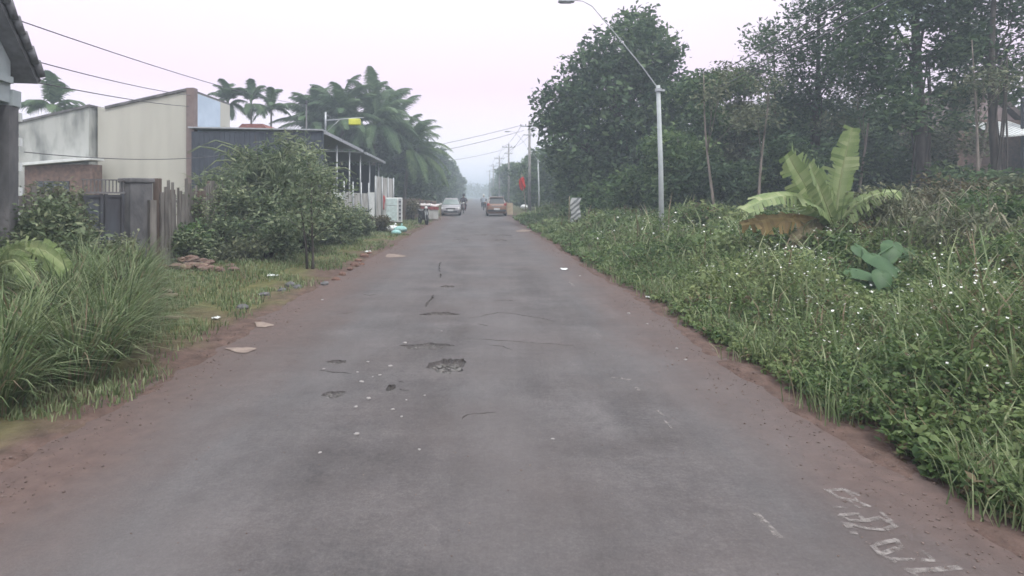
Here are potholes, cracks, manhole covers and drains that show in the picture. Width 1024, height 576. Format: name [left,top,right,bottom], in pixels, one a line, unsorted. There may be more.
pothole [427,358,466,374]
crack [465,300,572,350]
pothole [321,391,345,399]
